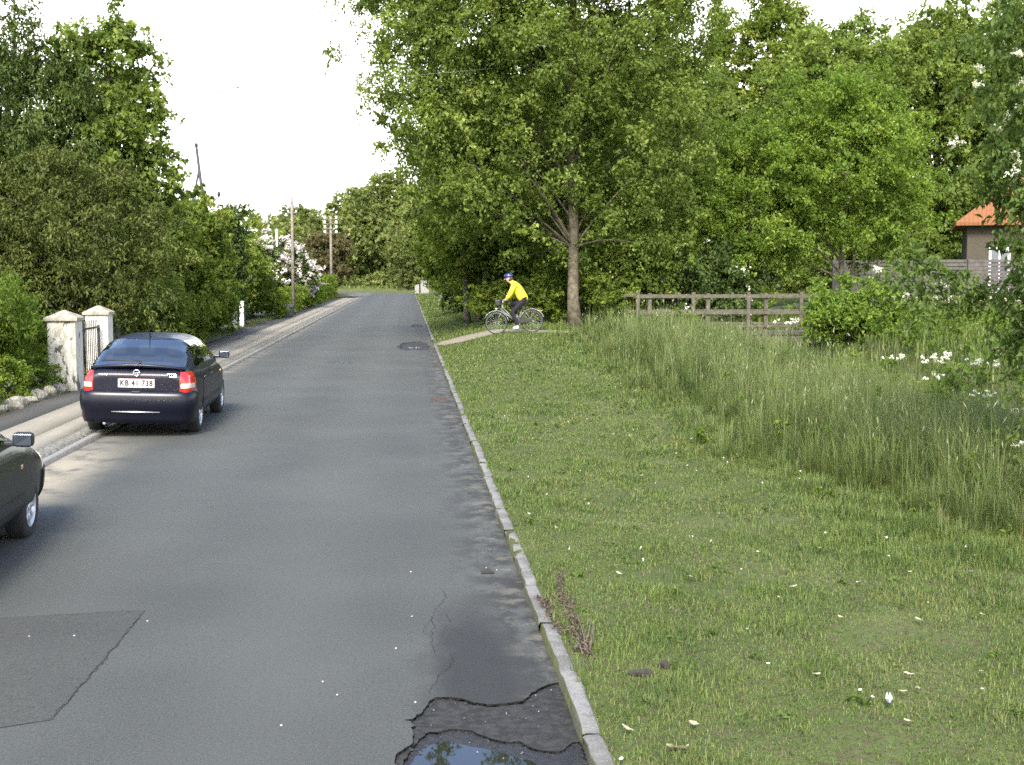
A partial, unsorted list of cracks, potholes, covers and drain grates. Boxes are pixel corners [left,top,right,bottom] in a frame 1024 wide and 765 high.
pothole [394,682,589,765]
crack [423,589,454,695]
